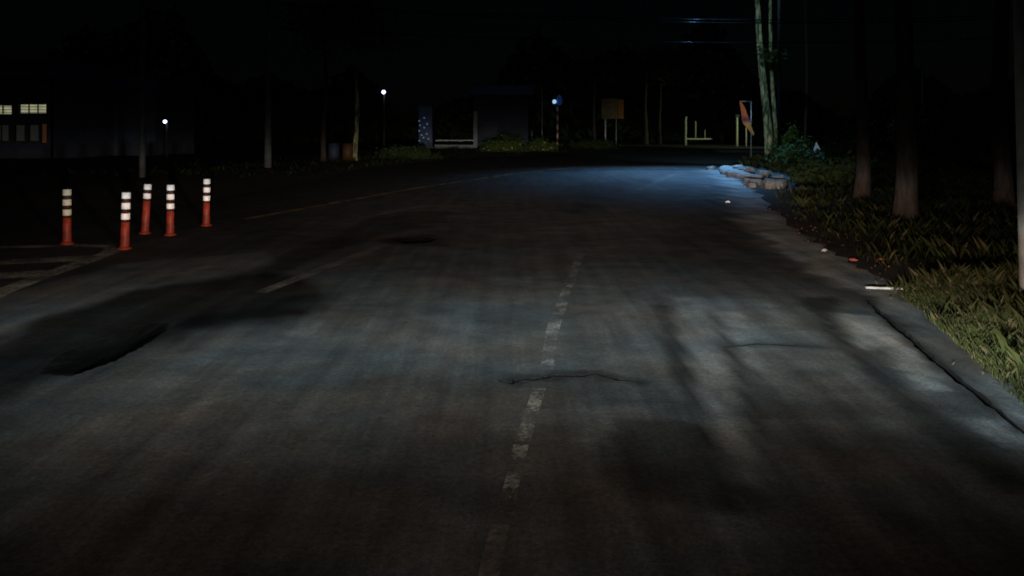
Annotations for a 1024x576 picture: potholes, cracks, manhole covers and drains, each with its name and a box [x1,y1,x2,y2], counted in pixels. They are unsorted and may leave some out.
crack [498,372,645,384]
pothole [36,322,170,376]
